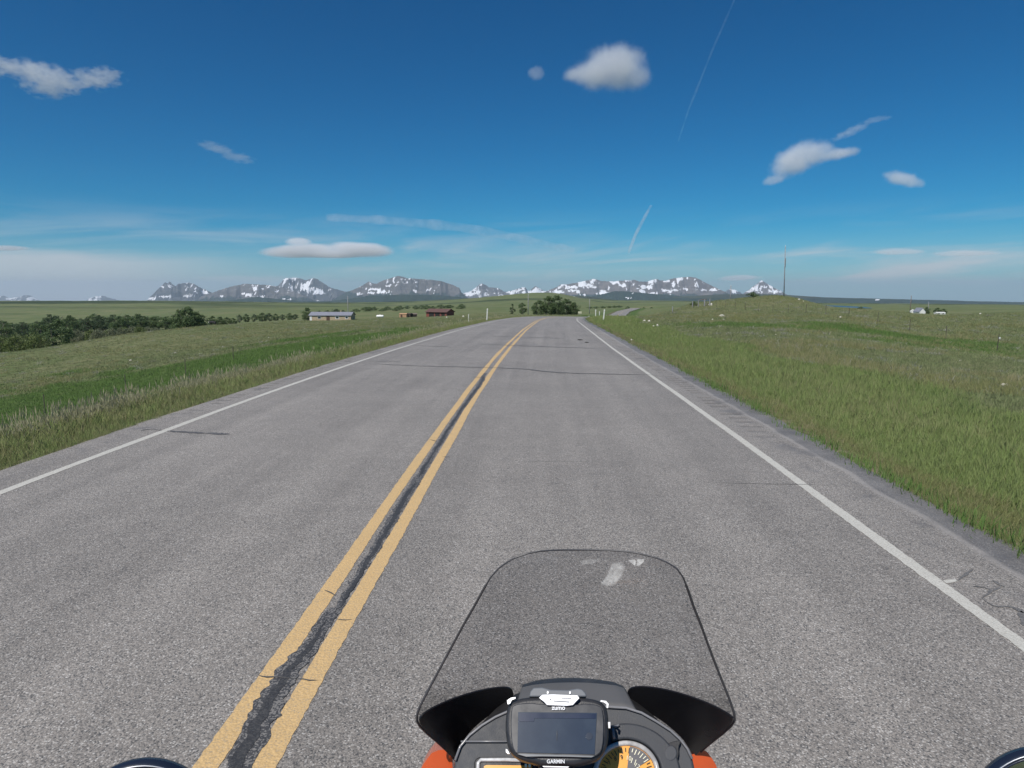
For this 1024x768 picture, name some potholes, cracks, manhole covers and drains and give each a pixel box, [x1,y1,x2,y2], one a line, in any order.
crack [344,335,649,378]
crack [956,569,1024,626]
